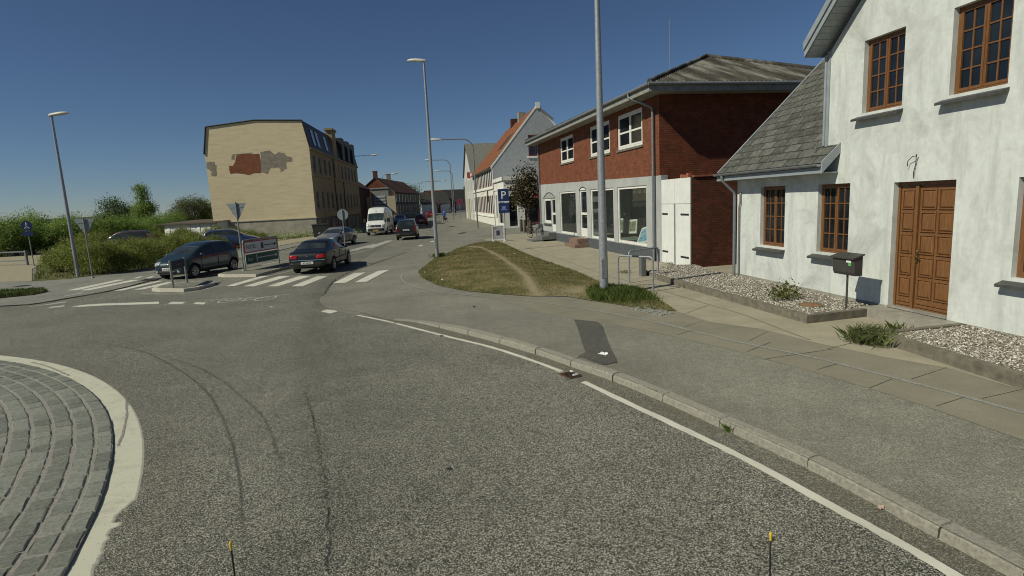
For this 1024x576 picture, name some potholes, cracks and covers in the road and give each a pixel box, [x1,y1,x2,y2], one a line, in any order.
crack [303,392,335,574]
